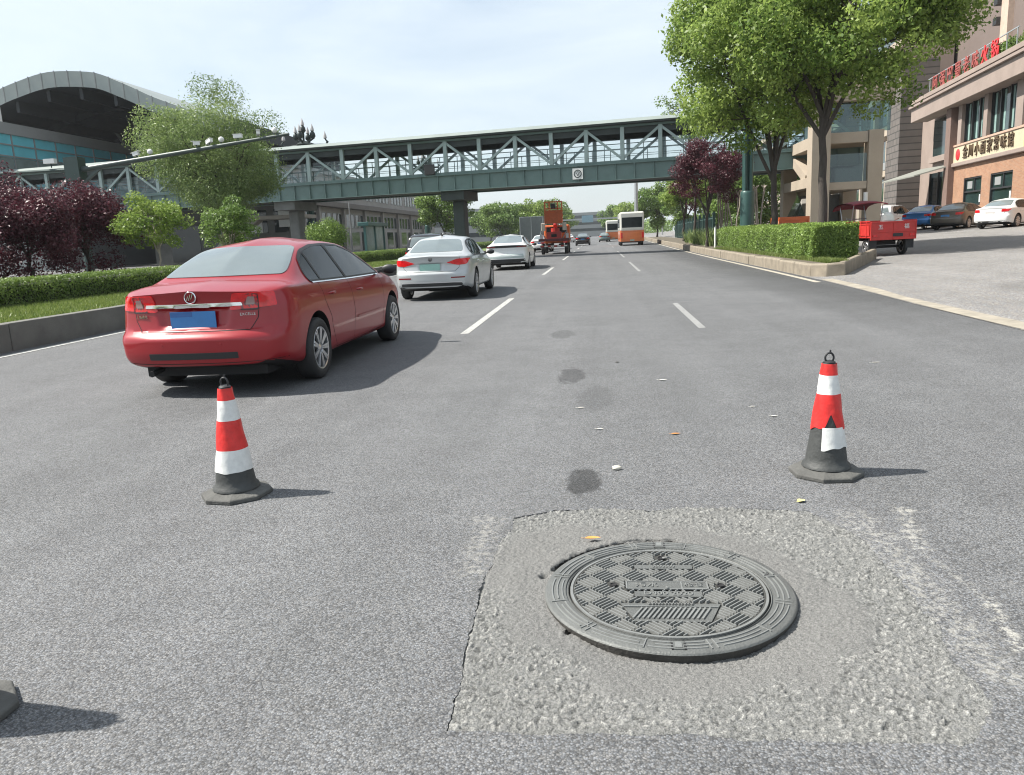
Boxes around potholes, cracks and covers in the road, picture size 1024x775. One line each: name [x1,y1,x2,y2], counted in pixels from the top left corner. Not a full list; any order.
manhole cover [545,542,798,664]
